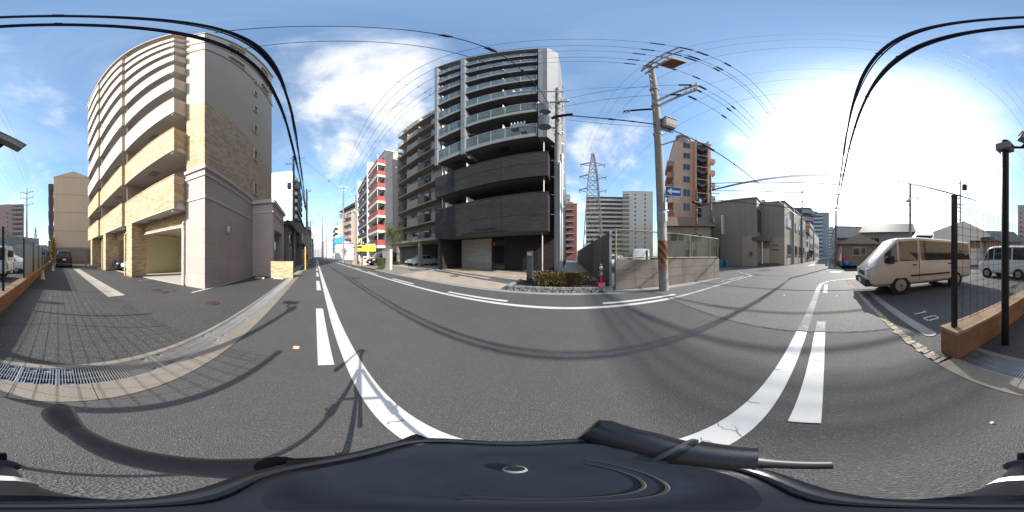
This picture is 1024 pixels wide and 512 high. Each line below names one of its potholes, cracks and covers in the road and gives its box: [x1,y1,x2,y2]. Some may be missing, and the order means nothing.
drain grate [16,367,57,385]
drain grate [58,356,164,385]
